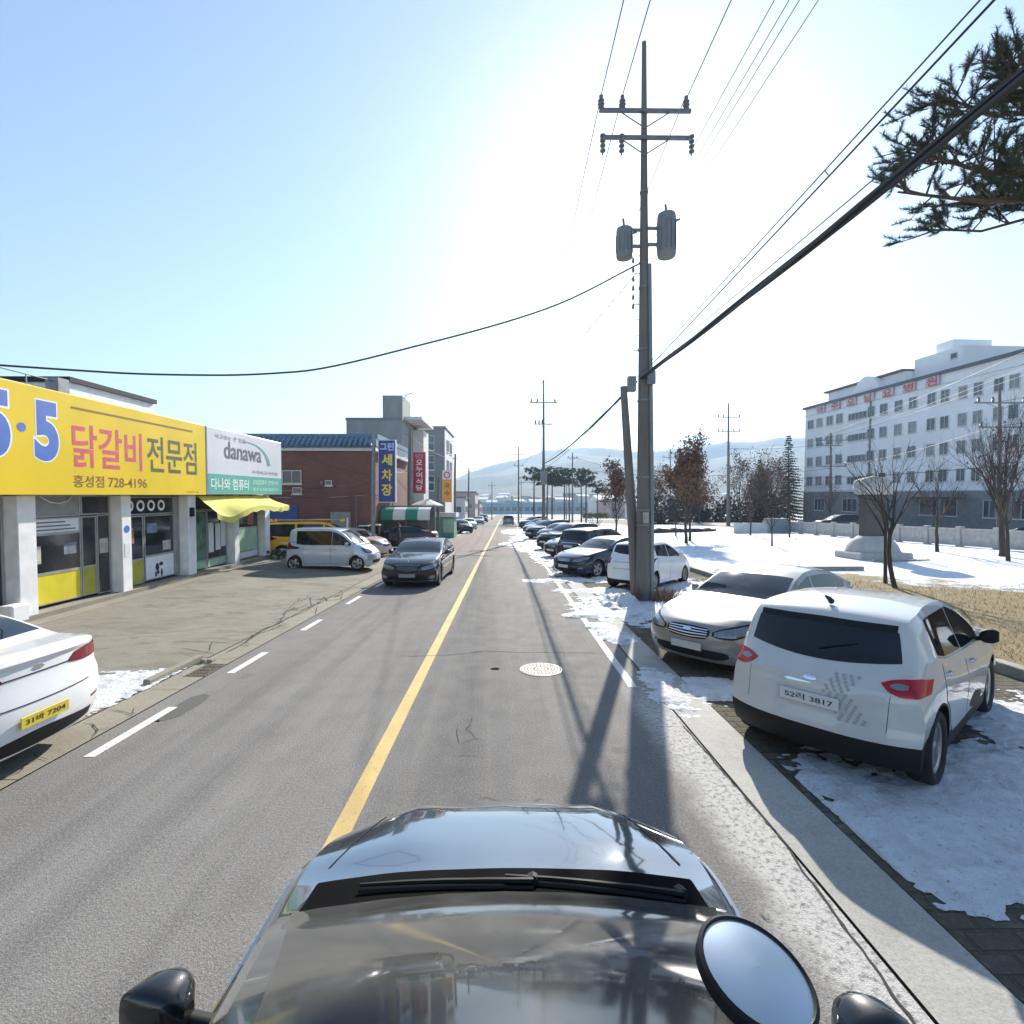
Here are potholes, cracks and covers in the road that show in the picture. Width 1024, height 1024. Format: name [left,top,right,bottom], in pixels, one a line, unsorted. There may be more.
manhole cover [520,663,562,676]
crack [181,587,355,659]
